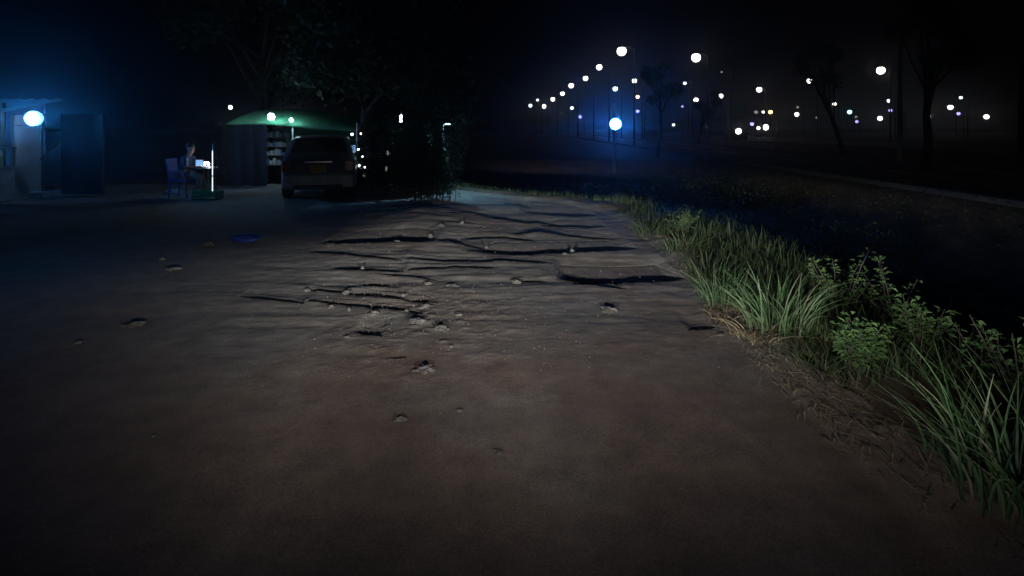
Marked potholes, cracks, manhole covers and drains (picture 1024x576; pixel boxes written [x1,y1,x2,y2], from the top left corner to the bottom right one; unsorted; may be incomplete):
pothole [352,327,382,337]
